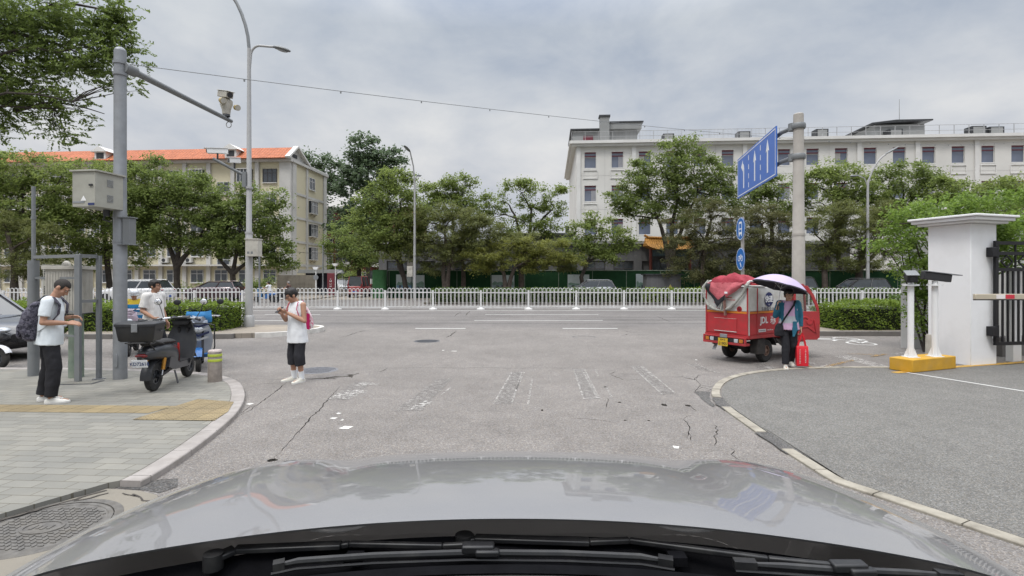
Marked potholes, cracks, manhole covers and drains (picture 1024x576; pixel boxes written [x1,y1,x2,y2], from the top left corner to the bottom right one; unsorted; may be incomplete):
crack [680,375,711,441]
manhole cover [0,499,124,560]
